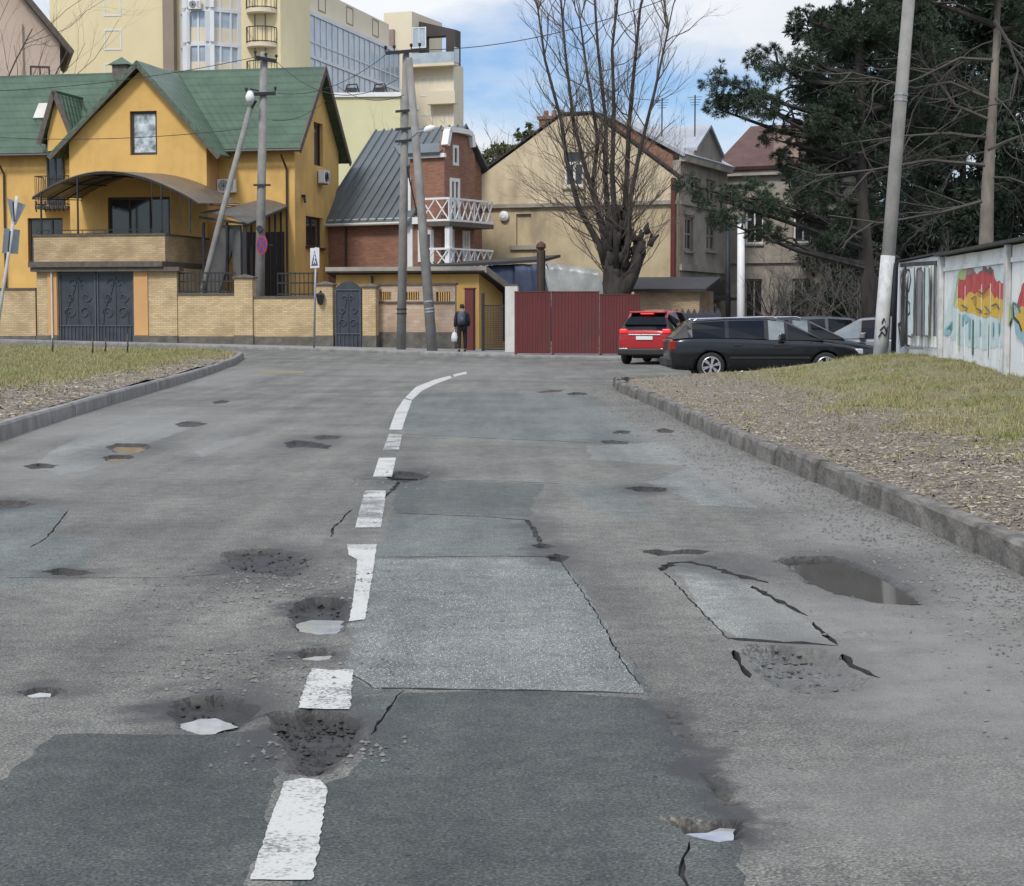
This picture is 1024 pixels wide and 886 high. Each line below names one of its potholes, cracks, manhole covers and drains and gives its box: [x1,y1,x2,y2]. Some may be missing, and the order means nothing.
pothole [286,597,352,635]
pothole [655,816,745,843]
pothole [42,568,94,576]
pothole [106,443,152,453]
pothole [263,708,370,779]
crack [330,510,352,537]
pothole [17,687,68,698]
pothole [219,548,317,577]
pothole [284,440,332,449]
crack [678,843,691,886]
pothole [741,644,874,694]
pothole [770,556,934,605]
